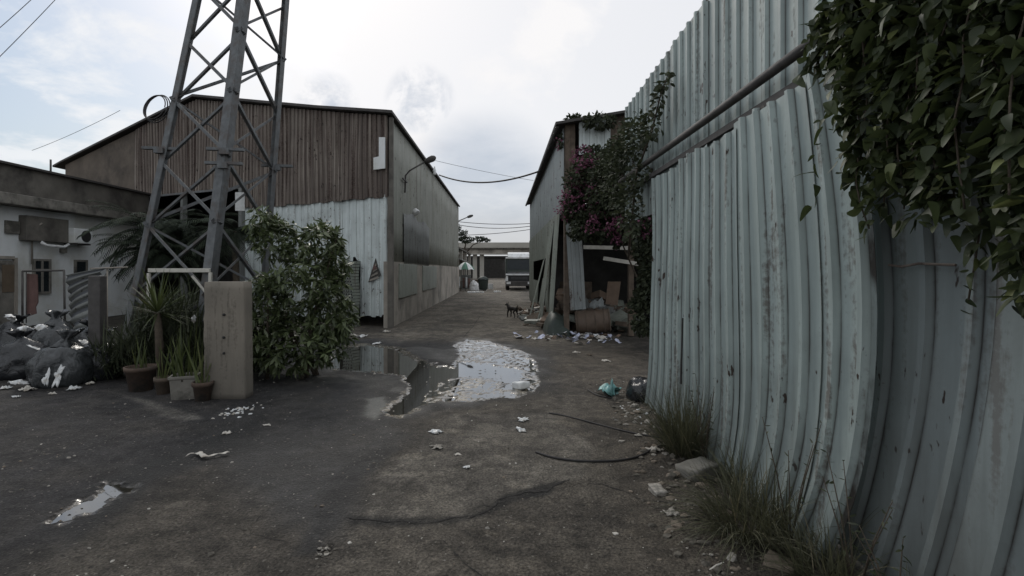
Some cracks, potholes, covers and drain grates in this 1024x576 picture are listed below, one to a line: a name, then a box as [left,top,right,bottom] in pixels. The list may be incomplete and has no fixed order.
pothole [324,339,541,418]
pothole [37,480,146,526]
crack [328,479,570,576]
